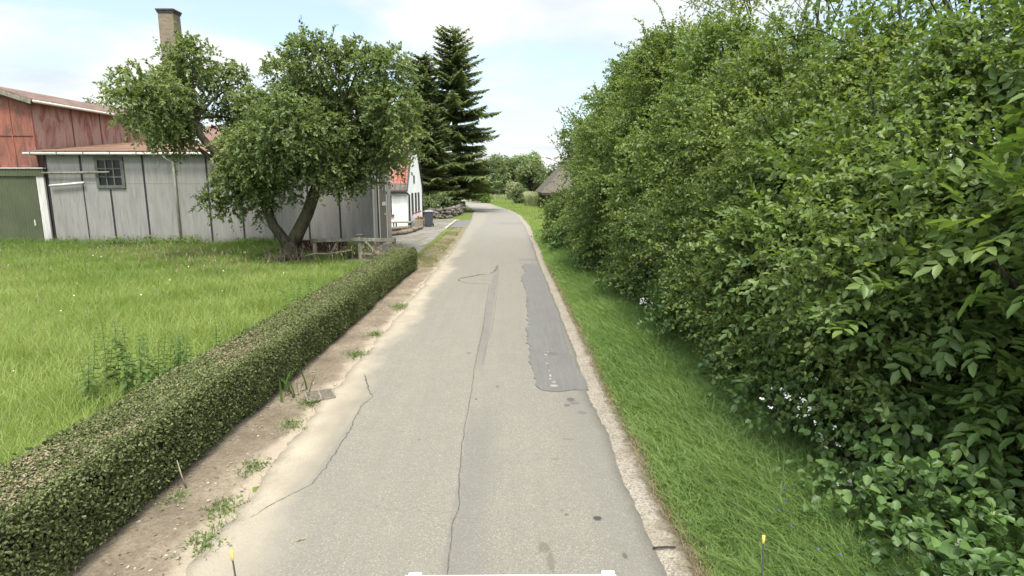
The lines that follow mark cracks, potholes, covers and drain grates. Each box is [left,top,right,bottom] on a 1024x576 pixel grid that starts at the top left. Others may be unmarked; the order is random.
crack [251,262,527,575]
